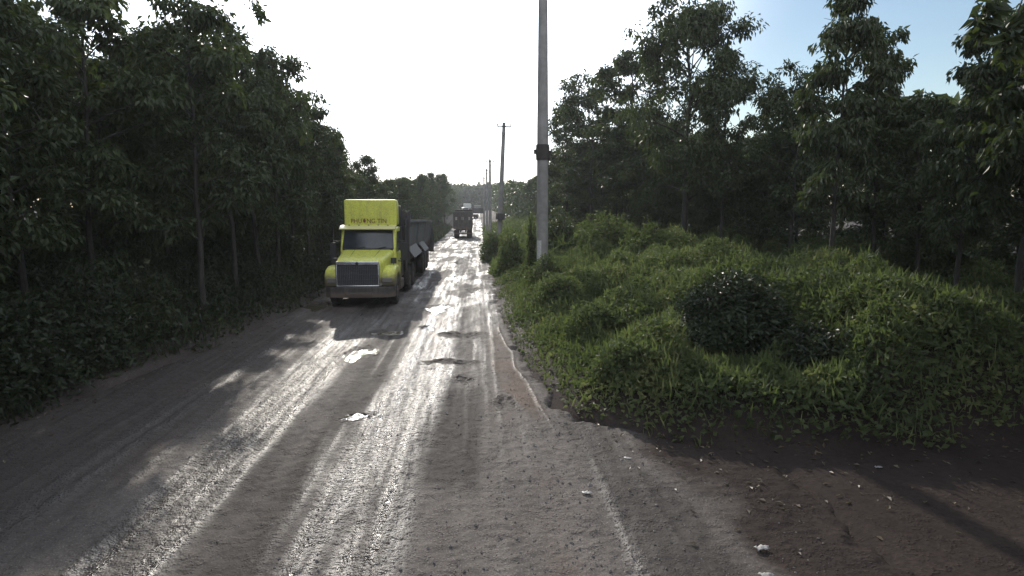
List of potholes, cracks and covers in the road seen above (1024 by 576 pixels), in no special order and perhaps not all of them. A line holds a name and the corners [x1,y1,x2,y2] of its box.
pothole [358,329,410,337]
pothole [333,343,383,368]
pothole [431,330,495,341]
pothole [416,303,456,317]
pothole [455,375,476,385]
pothole [414,357,488,367]
pothole [488,393,519,411]
pothole [334,411,381,423]
